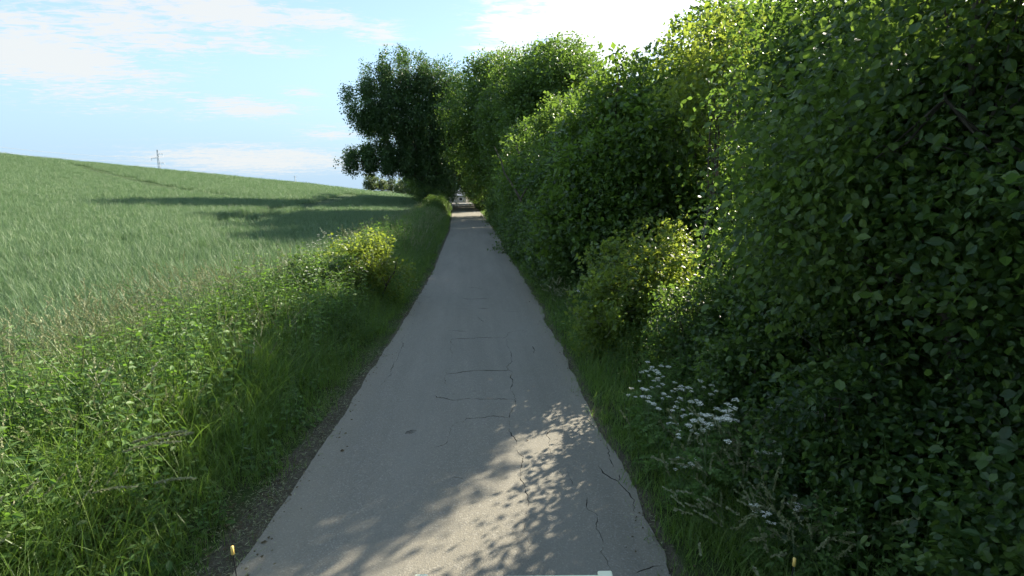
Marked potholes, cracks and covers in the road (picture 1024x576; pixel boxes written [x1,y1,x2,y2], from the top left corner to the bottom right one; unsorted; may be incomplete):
crack [568,395,635,571]
crack [436,332,529,555]
